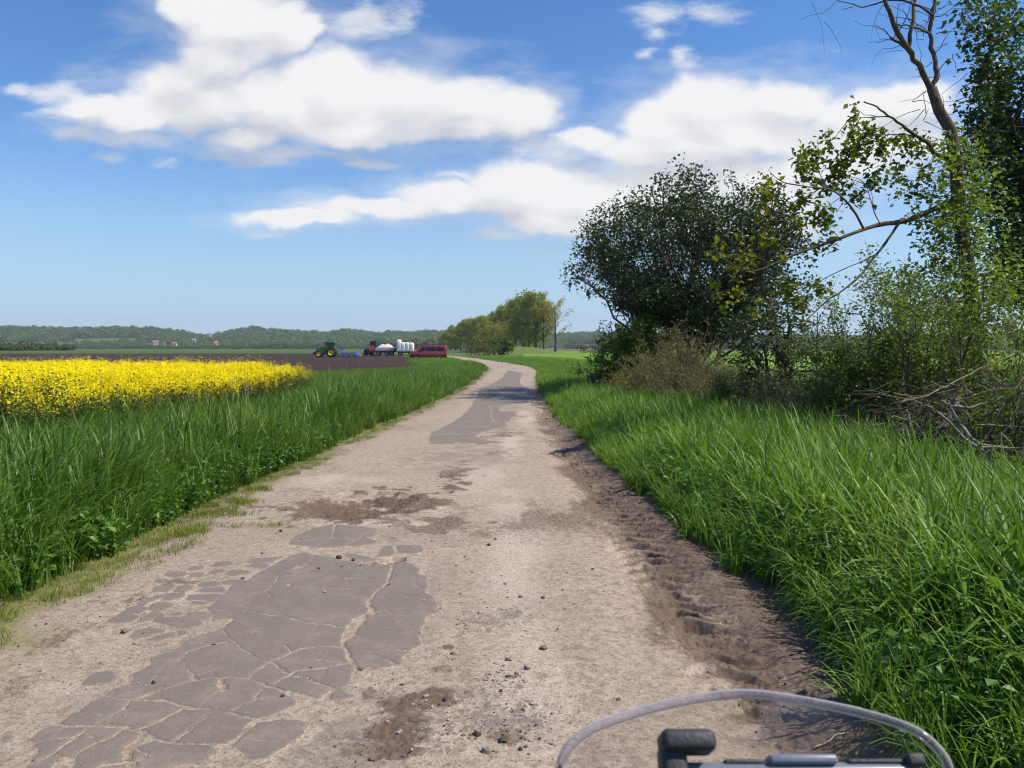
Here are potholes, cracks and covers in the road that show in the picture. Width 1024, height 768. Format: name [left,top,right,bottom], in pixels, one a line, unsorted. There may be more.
pothole [288,490,423,521]
crack [34,524,548,768]
